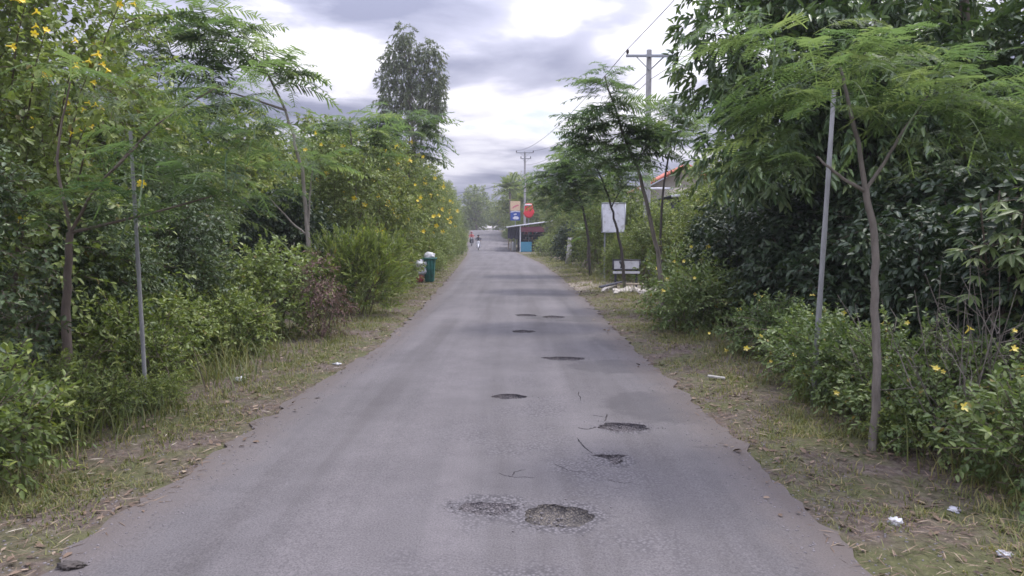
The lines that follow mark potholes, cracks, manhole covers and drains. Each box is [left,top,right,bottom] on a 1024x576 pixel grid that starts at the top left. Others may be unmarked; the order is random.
pothole [584,420,666,435]
pothole [498,499,616,536]
crack [555,392,608,472]
pothole [582,448,638,469]
pothole [443,497,533,517]
